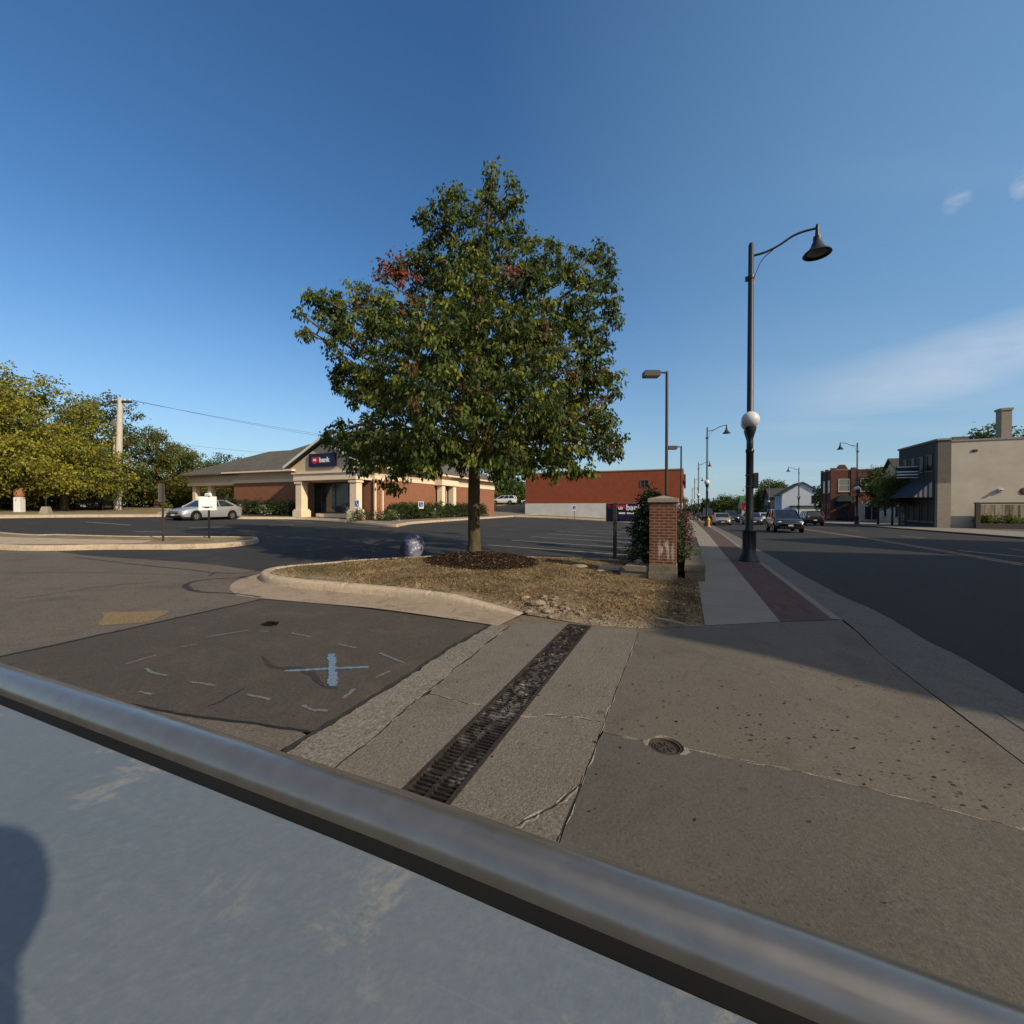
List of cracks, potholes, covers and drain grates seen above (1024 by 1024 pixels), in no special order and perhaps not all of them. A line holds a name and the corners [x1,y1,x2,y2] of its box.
crack [520,713,643,741]
drain grate [402,623,591,805]
manhole cover [642,735,691,755]
crack [513,783,582,828]
